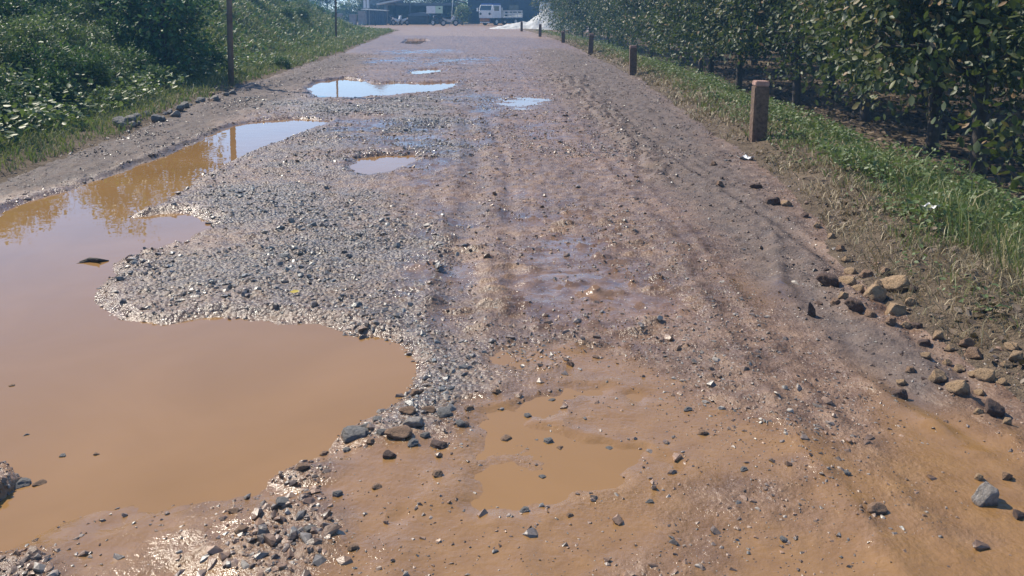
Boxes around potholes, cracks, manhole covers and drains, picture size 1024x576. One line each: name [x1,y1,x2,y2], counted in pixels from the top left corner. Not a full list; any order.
pothole [305,77,459,98]
pothole [0,116,430,552]
pothole [384,332,700,545]
pothole [472,95,557,111]
